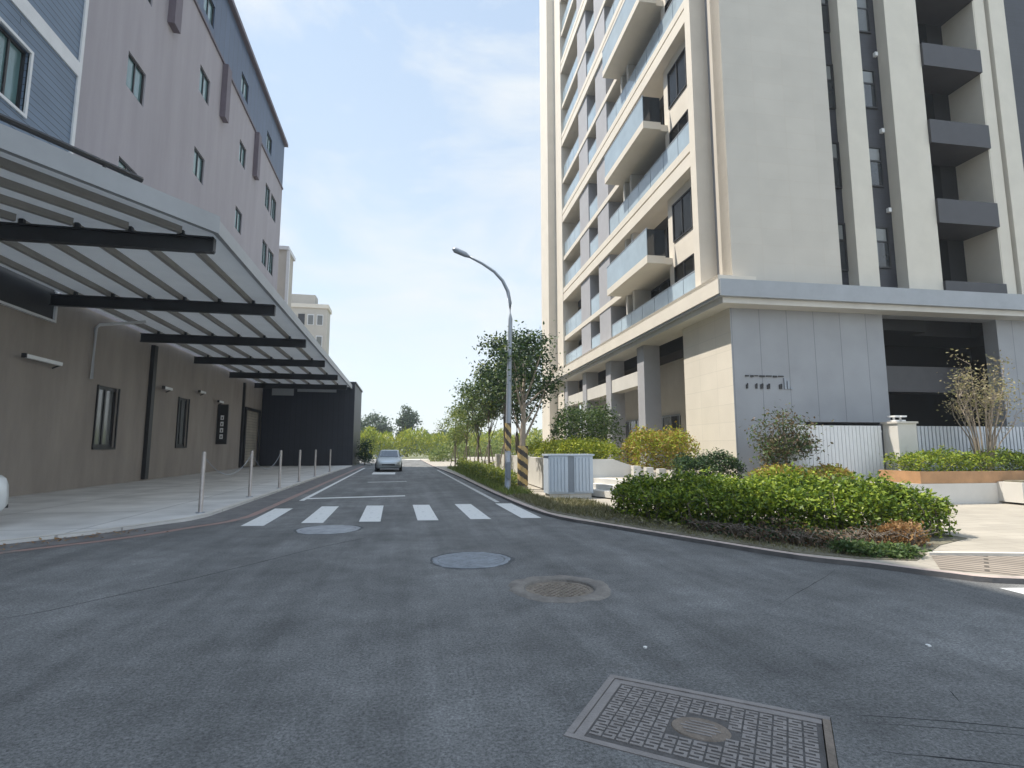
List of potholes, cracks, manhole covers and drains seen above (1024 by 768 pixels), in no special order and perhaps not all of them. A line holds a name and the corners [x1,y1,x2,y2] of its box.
manhole cover [563,674,838,768]
manhole cover [508,575,611,603]
manhole cover [293,525,363,535]
manhole cover [430,552,515,569]
